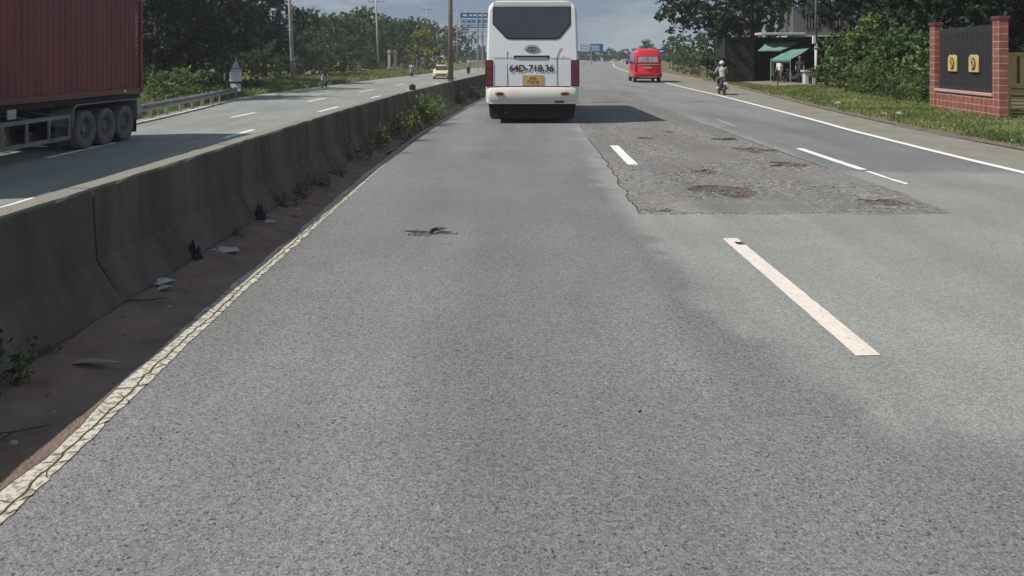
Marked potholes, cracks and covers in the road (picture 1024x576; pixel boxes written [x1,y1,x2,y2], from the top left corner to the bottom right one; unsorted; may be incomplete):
pothole [685,184,767,198]
pothole [730,146,778,154]
pothole [854,198,921,206]
pothole [405,226,458,236]
